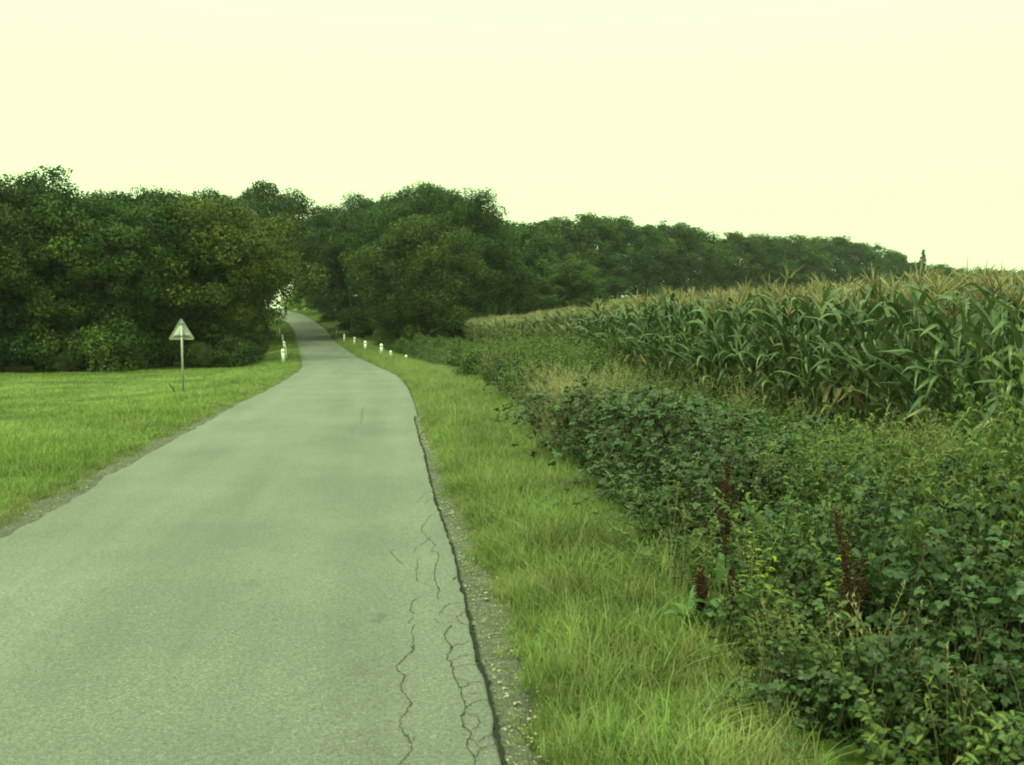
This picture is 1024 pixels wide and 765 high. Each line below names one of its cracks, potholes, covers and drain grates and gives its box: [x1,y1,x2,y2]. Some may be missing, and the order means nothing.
crack [390,381,507,765]
